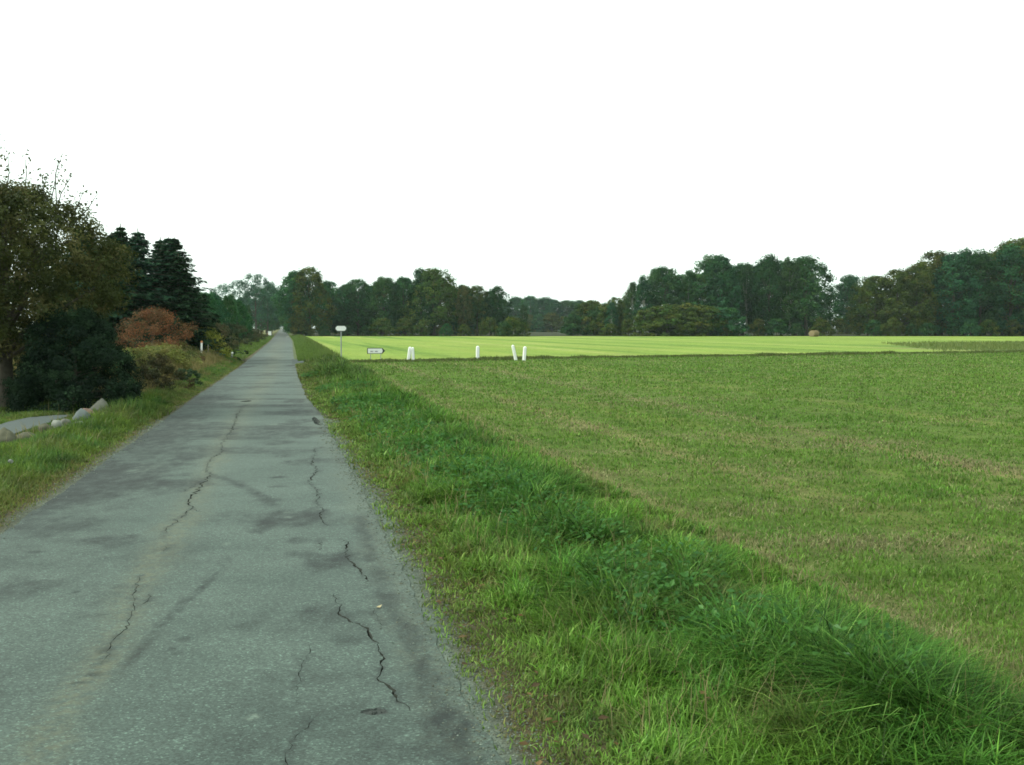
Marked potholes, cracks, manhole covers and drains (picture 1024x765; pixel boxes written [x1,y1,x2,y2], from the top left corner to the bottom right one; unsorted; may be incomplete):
crack [102,577,151,665]
crack [333,595,410,710]
crack [308,447,324,523]
crack [343,540,368,584]
crack [163,408,241,534]
